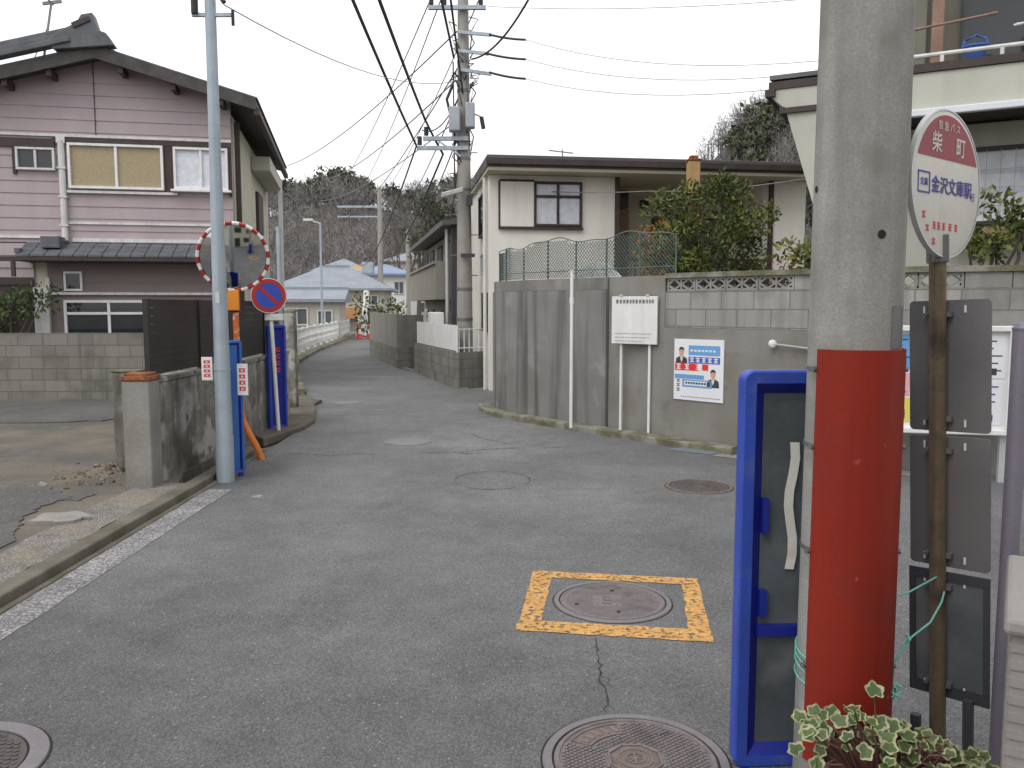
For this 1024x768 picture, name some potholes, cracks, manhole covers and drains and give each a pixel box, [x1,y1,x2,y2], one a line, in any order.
crack [595,637,610,713]
manhole cover [0,721,53,768]
manhole cover [383,437,432,446]
manhole cover [540,714,733,768]
manhole cover [552,581,673,624]
crack [280,435,574,456]
manhole cover [664,479,734,494]
